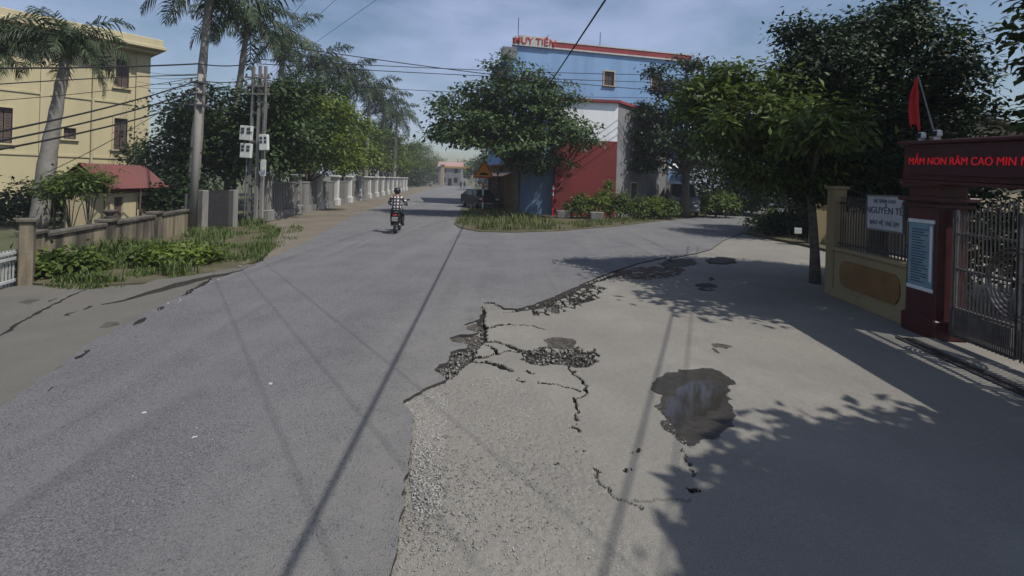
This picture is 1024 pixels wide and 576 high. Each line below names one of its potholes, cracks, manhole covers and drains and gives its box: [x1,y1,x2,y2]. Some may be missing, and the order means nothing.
pothole [695,283,718,291]
pothole [544,337,576,352]
pothole [656,258,698,270]
pothole [450,352,472,368]
pothole [451,335,485,353]
crack [442,272,701,510]
pothole [650,368,736,447]
pothole [612,266,686,280]
